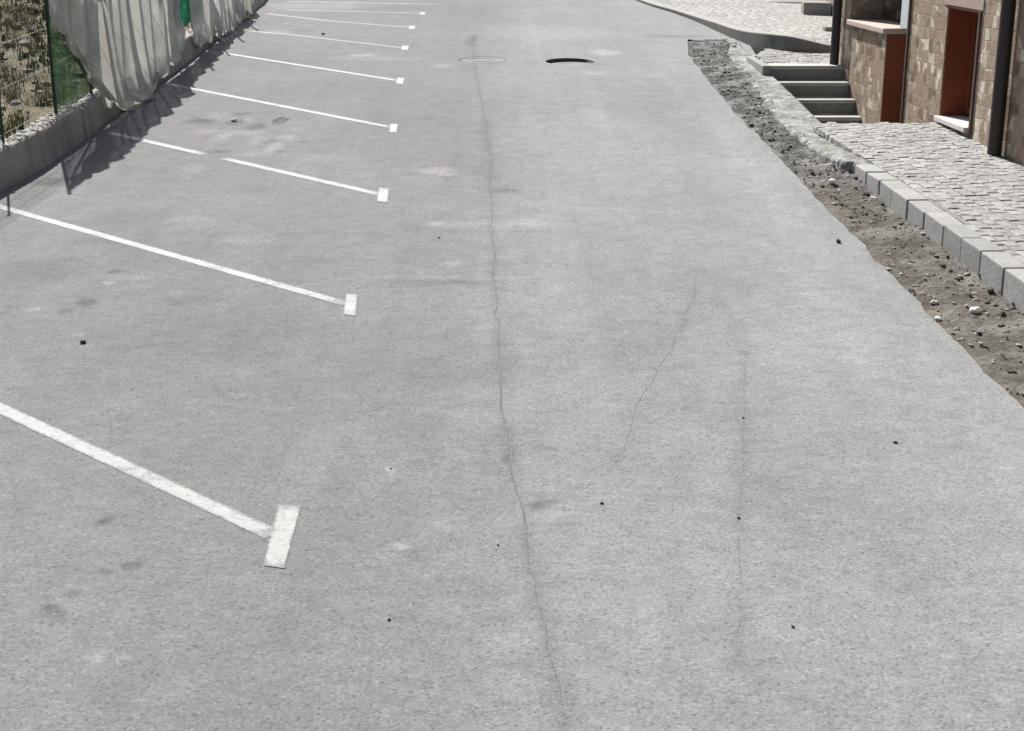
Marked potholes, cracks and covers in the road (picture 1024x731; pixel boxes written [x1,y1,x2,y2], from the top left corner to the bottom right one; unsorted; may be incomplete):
crack [611,266,699,471]
crack [736,352,746,666]
crack [449,36,566,731]
